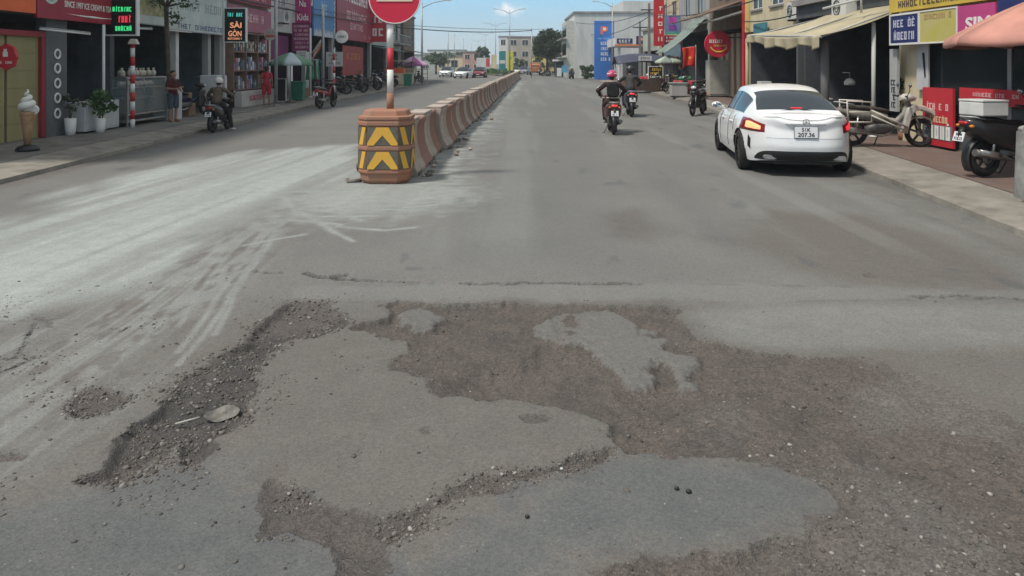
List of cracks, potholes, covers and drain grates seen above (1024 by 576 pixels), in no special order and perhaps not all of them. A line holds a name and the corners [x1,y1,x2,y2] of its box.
pothole [73,301,350,487]
crack [302,272,405,283]
crack [910,294,1024,302]
pothole [254,445,616,576]
pothole [348,300,1024,576]
